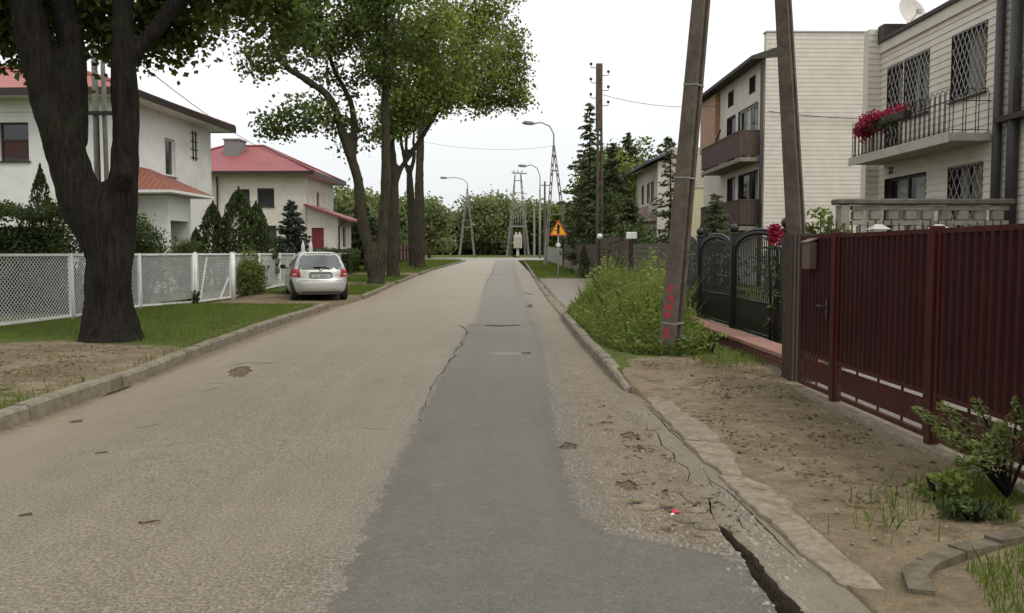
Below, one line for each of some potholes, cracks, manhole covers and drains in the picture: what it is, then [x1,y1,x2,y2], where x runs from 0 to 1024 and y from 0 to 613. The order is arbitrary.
pothole [228,366,252,377]
pothole [615,479,638,491]
pothole [559,442,577,450]
crack [643,402,806,569]
crack [419,325,471,421]
